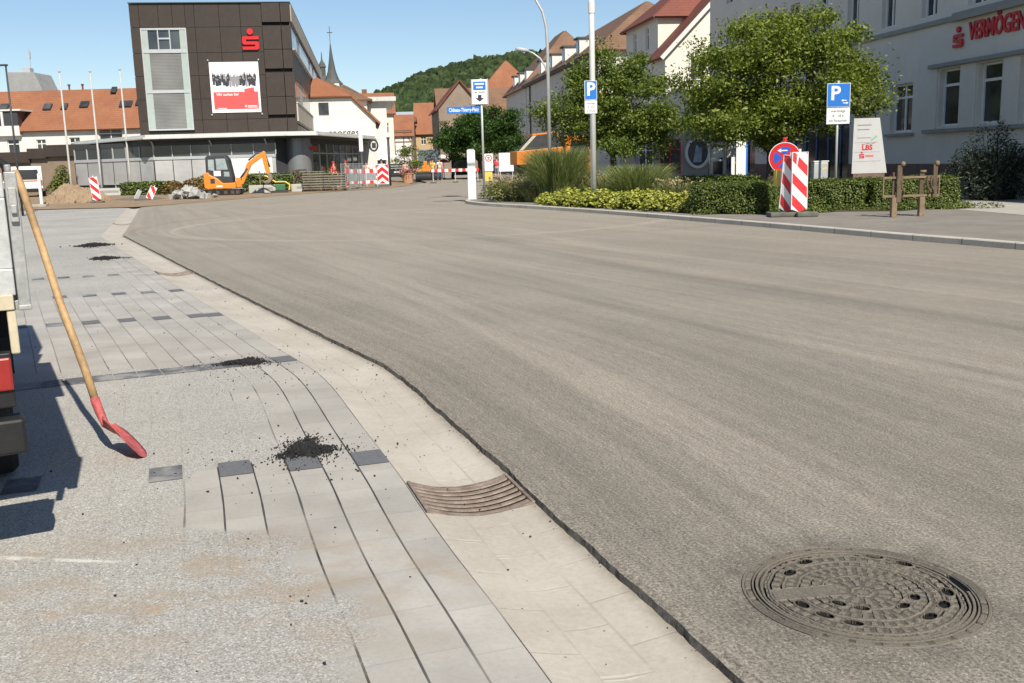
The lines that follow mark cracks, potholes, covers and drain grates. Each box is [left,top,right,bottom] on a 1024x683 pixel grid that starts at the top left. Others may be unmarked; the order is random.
manhole cover [741,546,993,649]
drain grate [407,473,535,516]
